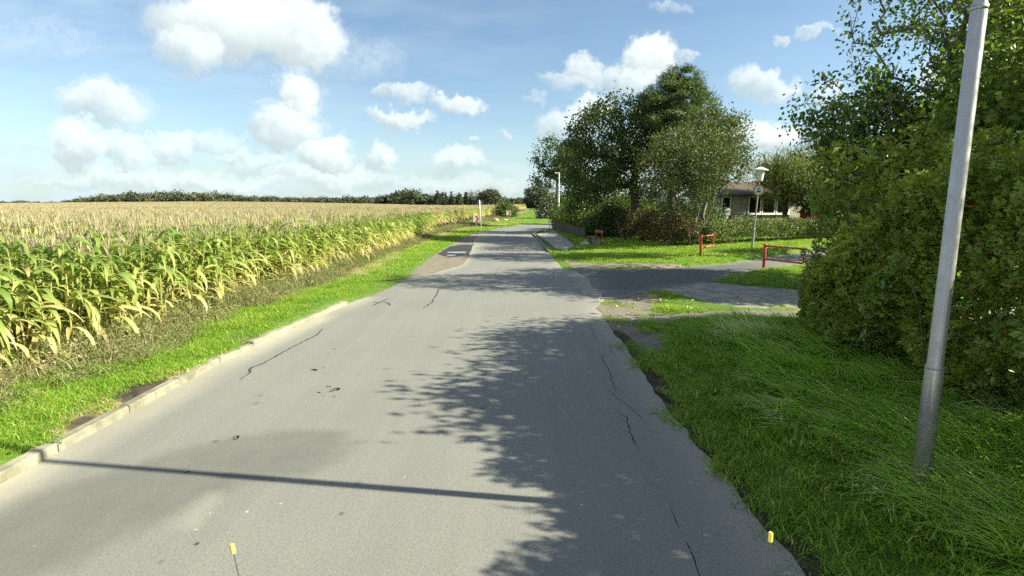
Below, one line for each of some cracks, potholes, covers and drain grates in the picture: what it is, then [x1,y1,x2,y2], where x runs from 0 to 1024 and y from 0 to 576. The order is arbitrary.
crack [669,505,700,576]
crack [559,318,643,450]
